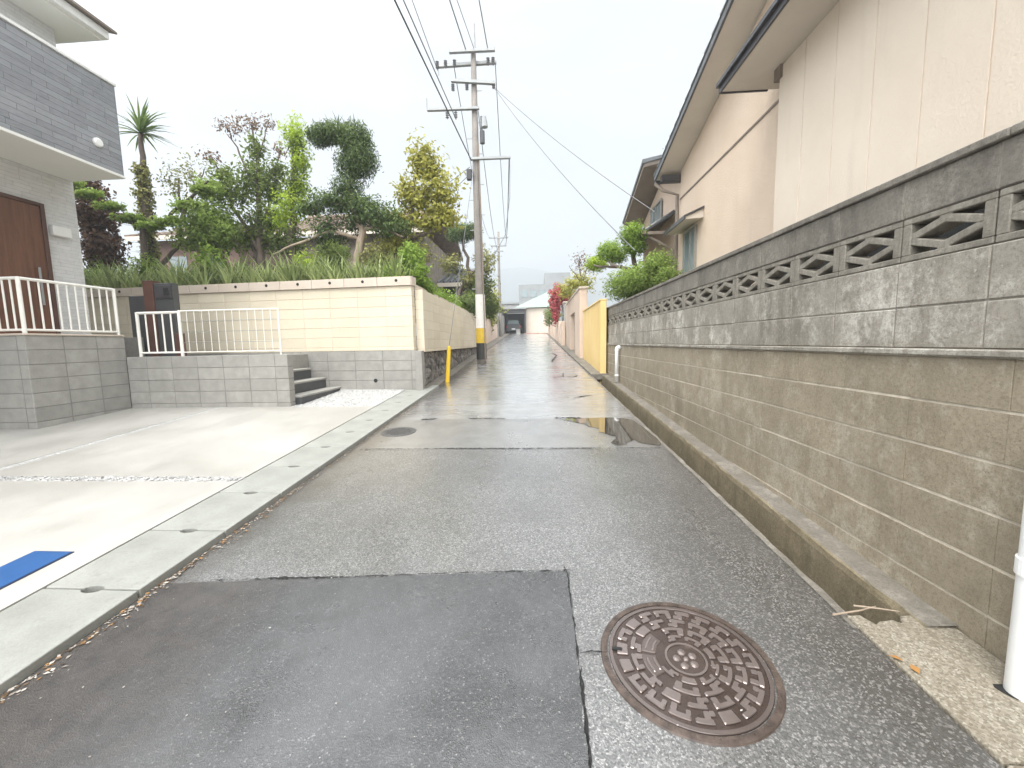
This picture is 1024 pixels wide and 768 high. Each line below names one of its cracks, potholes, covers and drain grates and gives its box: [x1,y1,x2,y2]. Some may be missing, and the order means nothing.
manhole cover [601,602,786,747]
manhole cover [381,427,416,437]
